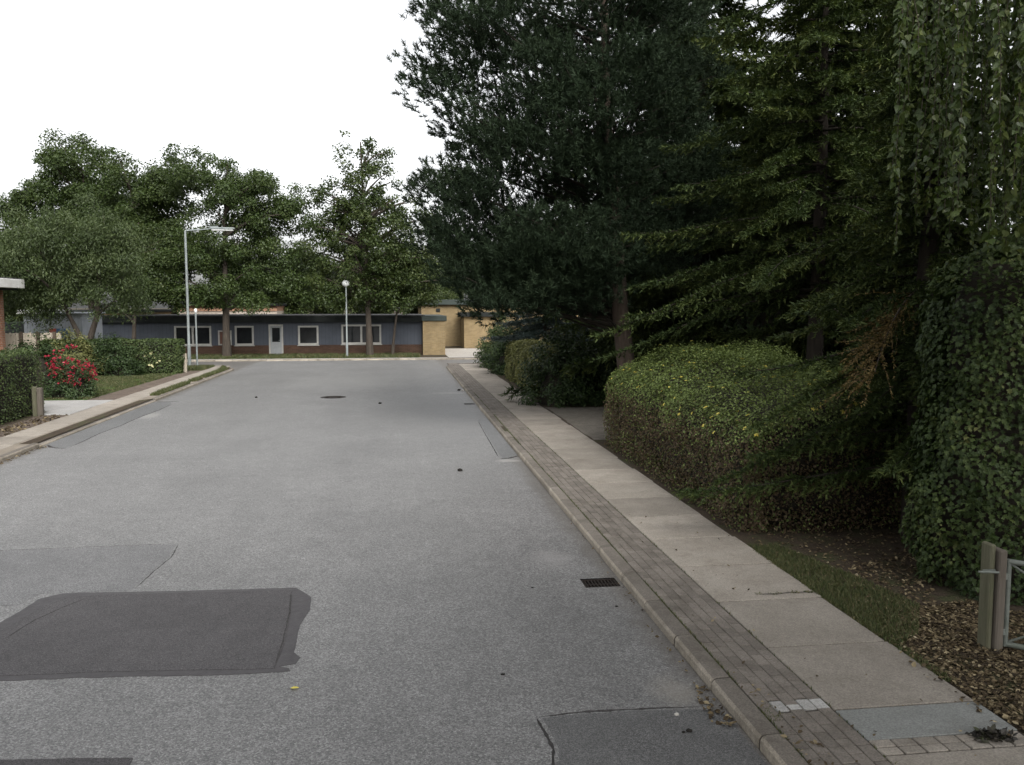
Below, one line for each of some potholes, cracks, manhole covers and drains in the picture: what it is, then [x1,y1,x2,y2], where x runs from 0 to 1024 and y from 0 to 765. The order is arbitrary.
drain grate [581,578,620,588]
